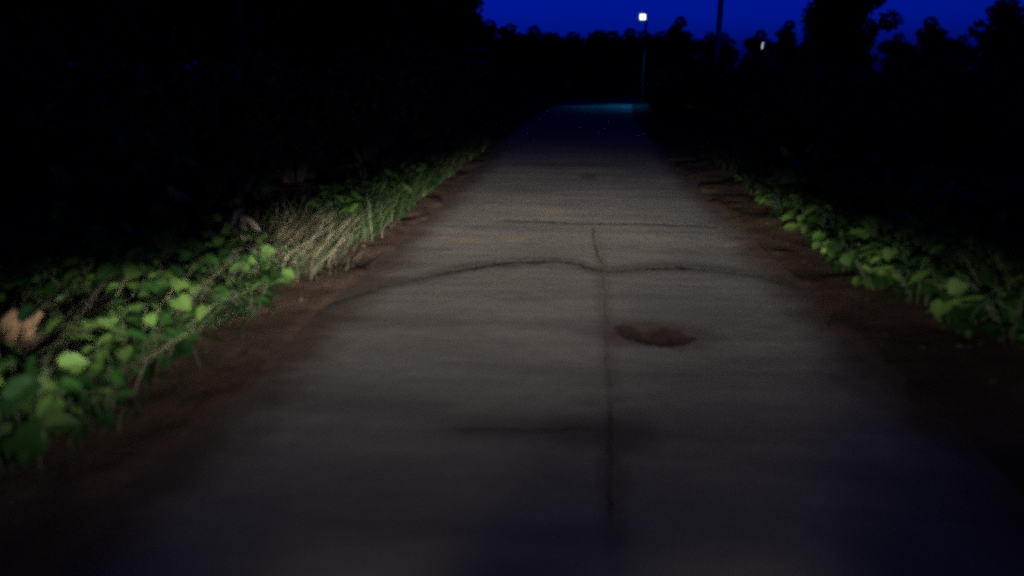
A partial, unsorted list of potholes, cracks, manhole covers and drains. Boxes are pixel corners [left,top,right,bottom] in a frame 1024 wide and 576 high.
pothole [614,323,697,348]
crack [327,220,785,522]
